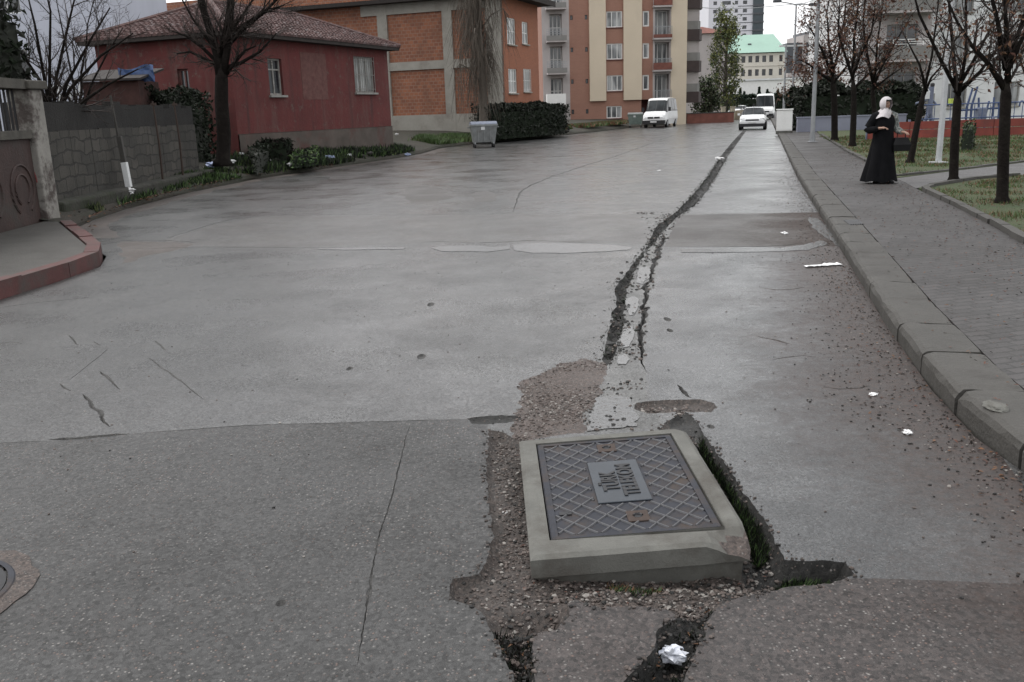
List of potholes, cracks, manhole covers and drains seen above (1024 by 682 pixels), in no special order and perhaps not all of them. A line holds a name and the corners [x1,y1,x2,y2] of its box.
manhole cover [519,429,751,584]
manhole cover [0,550,40,613]
pothole [449,412,854,645]
crack [437,129,747,372]
crack [148,340,203,399]
pothole [634,399,717,416]
